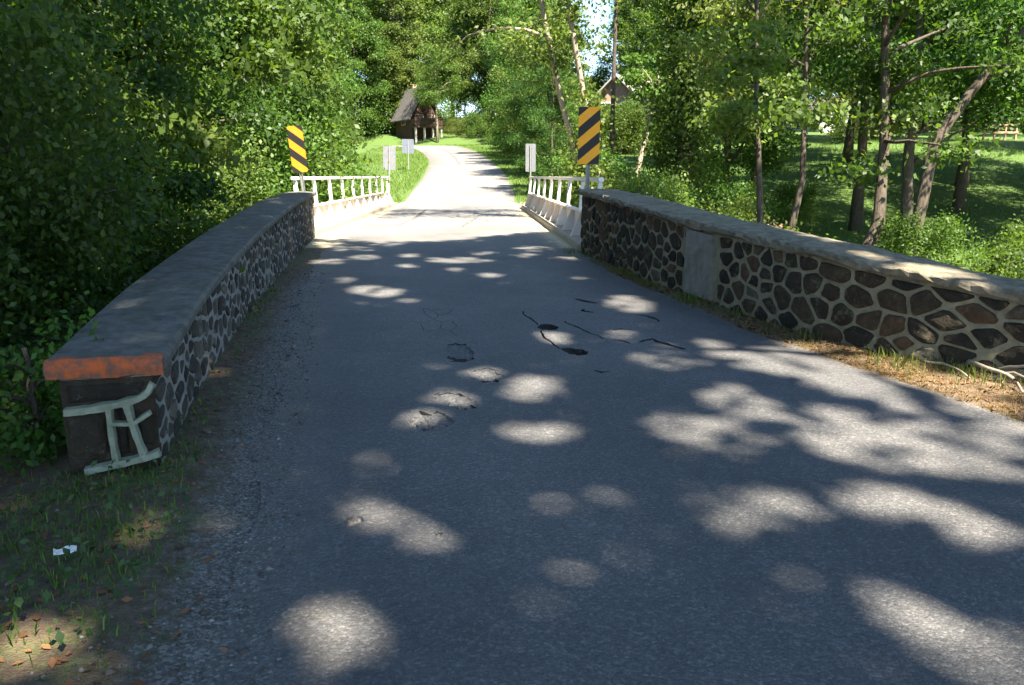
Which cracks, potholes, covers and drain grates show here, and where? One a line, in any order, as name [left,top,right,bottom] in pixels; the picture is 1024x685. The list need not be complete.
pothole [467,368,504,383]
pothole [344,515,364,526]
pothole [432,392,478,410]
crack [522,299,685,350]
pothole [405,411,454,432]
crack [412,308,458,336]
pothole [442,343,475,362]
